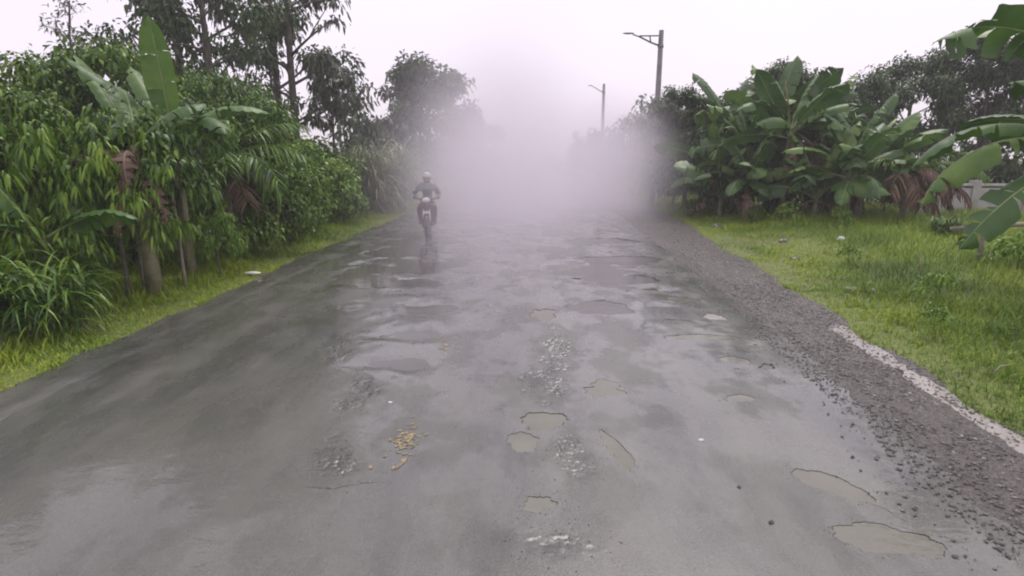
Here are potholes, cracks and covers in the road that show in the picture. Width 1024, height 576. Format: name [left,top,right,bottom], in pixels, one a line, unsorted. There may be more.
pothole [564,300,635,315]
pothole [507,431,540,453]
pothole [523,496,558,513]
pothole [726,394,756,402]
pothole [583,379,628,398]
pothole [599,429,636,472]
pothole [520,412,568,431]
pothole [529,309,556,322]
pothole [832,521,948,559]
pothole [790,468,877,503]
